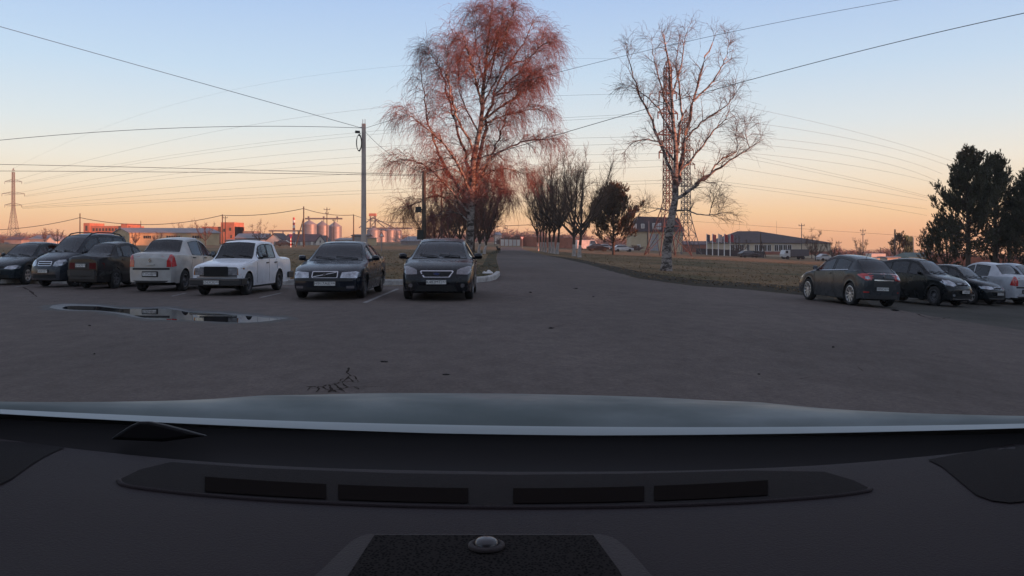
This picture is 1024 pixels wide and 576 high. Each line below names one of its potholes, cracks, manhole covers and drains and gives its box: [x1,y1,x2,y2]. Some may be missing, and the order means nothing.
crack [308,368,382,392]
